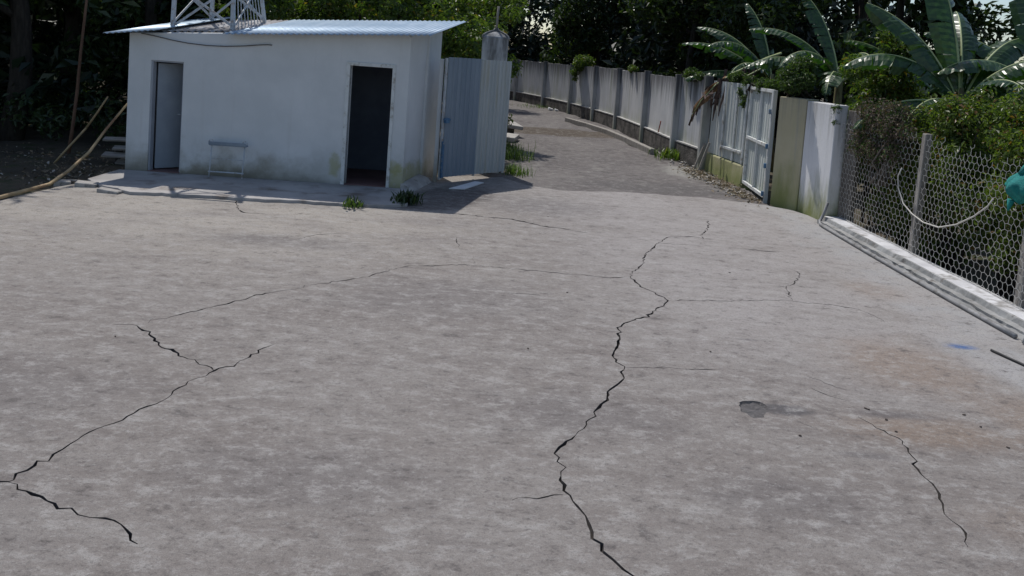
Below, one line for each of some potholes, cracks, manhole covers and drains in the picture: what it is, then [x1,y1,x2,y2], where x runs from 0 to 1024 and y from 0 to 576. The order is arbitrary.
pothole [739,401,769,418]
crack [461,214,586,233]
crack [0,220,884,576]
crack [862,419,968,547]
